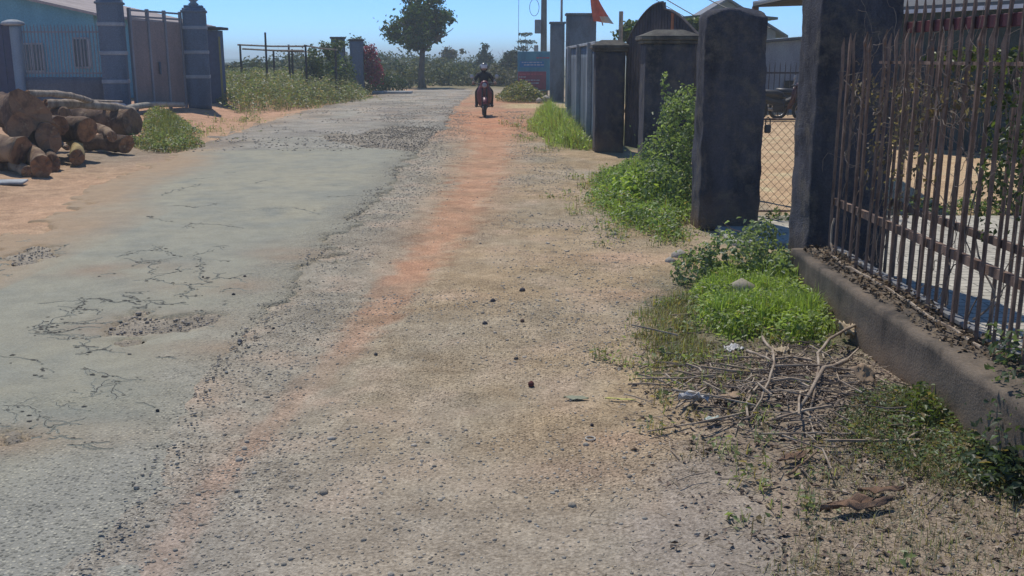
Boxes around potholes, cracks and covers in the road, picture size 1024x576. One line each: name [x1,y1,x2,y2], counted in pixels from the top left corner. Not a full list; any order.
crack [0,245,254,450]
pothole [316,126,447,152]
crack [146,172,267,228]
pothole [104,311,223,347]
pothole [3,246,57,266]
